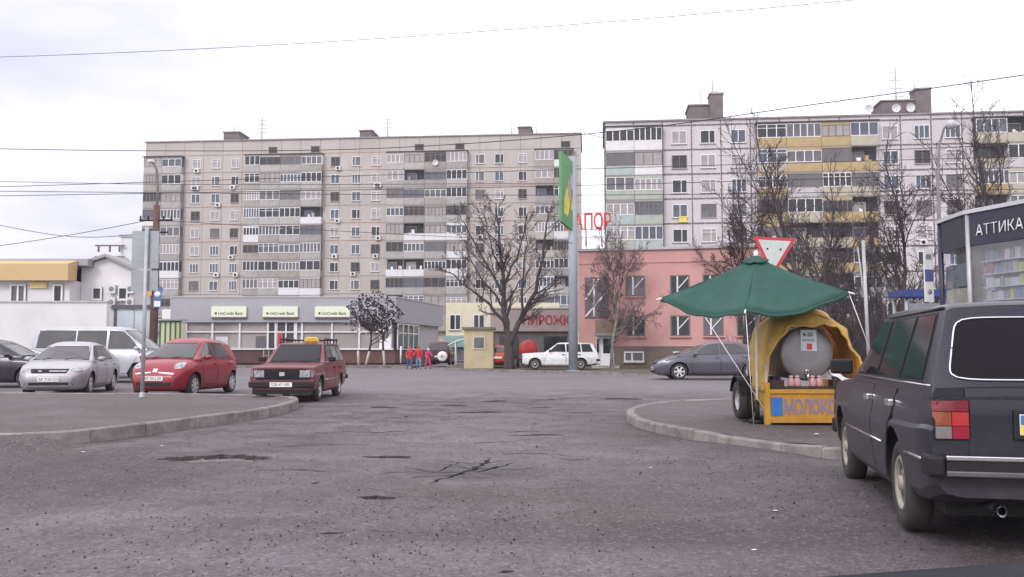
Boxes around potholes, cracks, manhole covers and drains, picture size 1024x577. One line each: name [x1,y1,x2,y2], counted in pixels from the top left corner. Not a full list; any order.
pothole [157,454,271,463]
crack [378,442,589,483]
